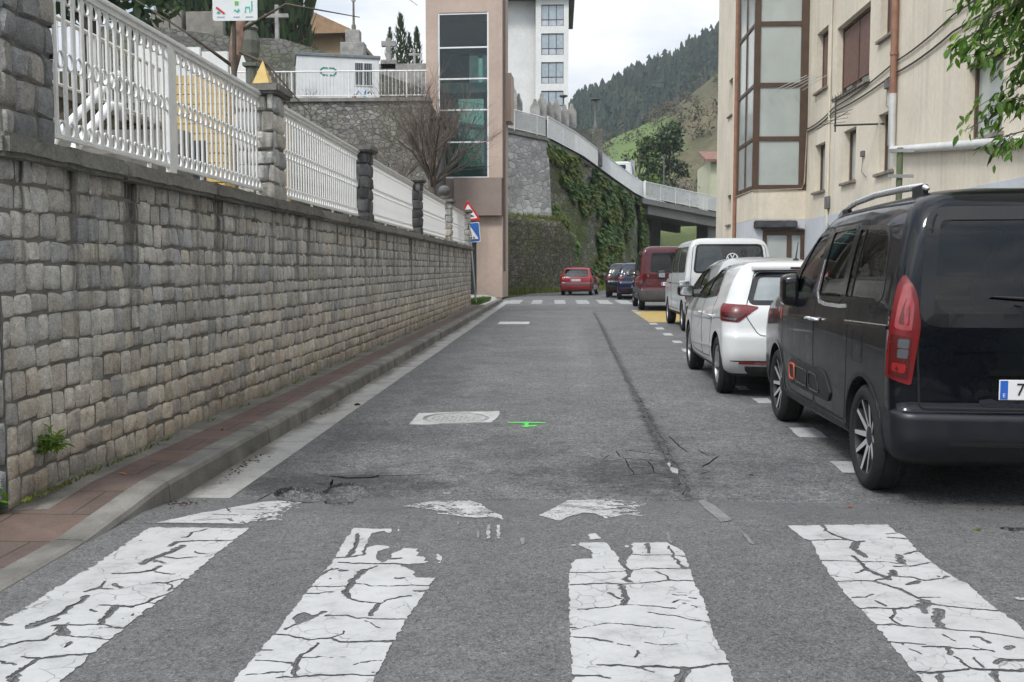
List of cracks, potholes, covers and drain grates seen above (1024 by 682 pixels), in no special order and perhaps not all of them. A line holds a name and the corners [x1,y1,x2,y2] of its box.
manhole cover [410,411,499,425]
pothole [274,486,324,503]
crack [582,313,718,499]
pothole [322,483,370,506]
